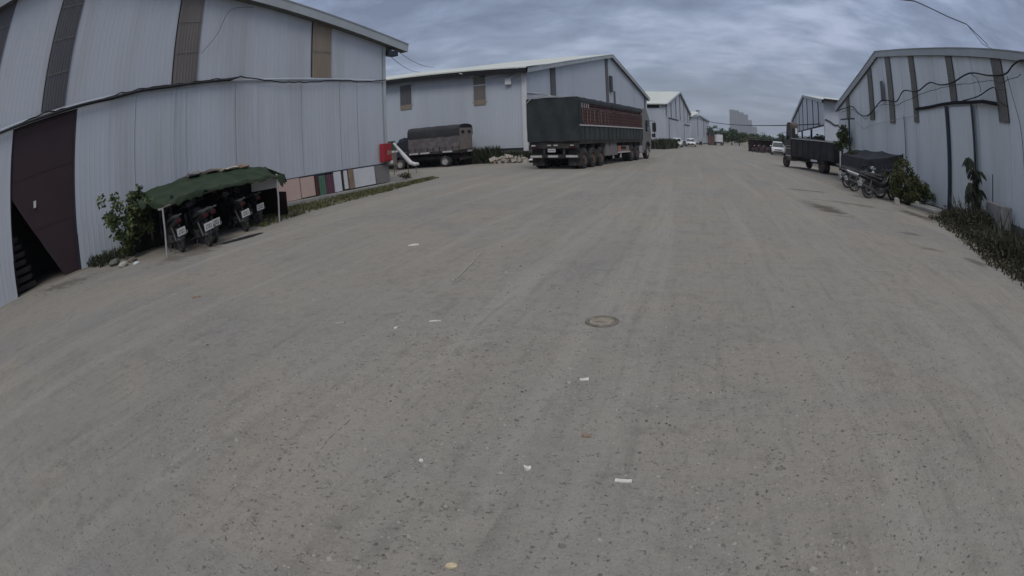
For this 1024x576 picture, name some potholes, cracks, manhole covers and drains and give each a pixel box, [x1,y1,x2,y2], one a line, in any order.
manhole cover [585,315,620,327]
crack [453,250,484,281]
